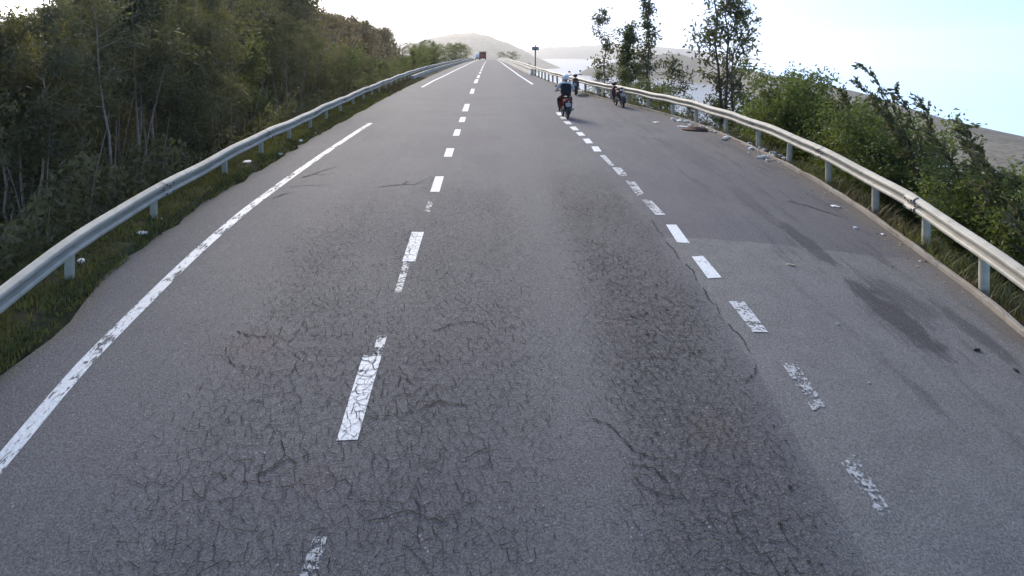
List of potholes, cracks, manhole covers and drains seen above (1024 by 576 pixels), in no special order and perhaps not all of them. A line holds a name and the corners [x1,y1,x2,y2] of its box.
crack [531,159,875,576]
crack [13,168,619,576]
